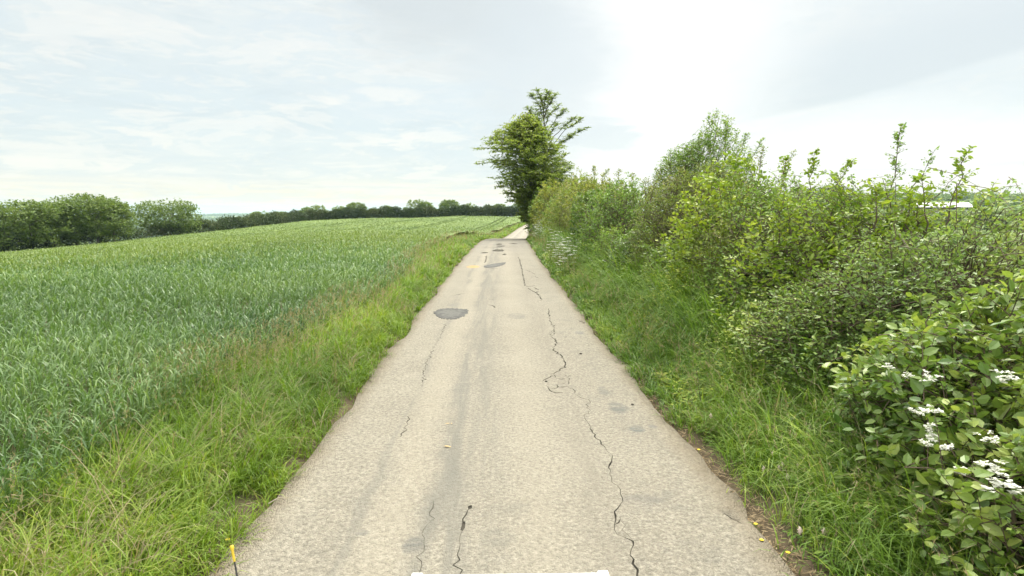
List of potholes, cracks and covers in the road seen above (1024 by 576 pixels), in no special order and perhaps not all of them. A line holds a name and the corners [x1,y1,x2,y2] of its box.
crack [452,505,472,574]
crack [580,397,639,576]
crack [485,246,575,393]
